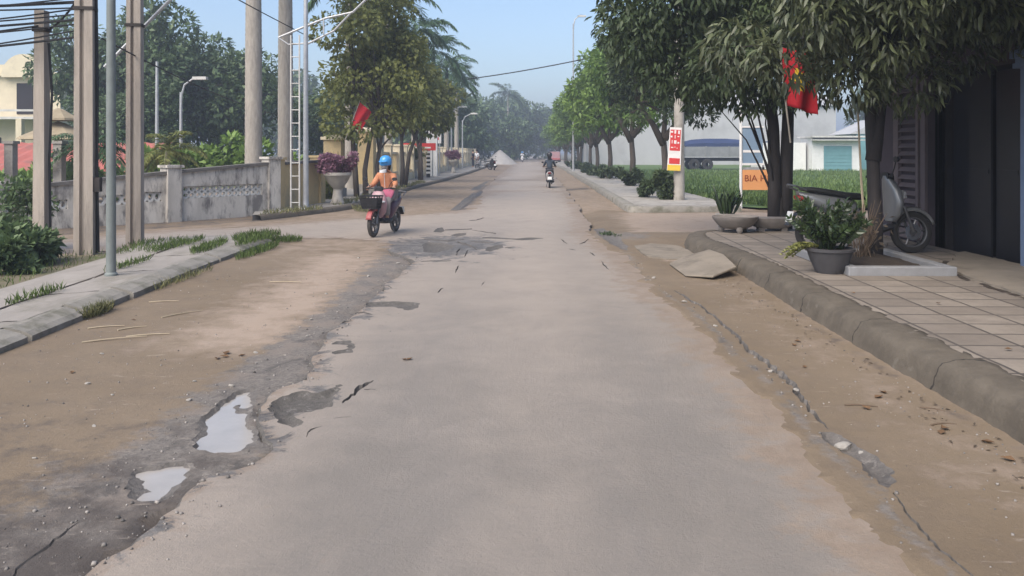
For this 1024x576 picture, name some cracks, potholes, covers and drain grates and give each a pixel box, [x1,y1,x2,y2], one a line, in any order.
crack [894,494,974,576]
crack [421,218,543,292]
crack [13,523,77,576]
crack [306,381,378,437]
pothole [192,386,259,453]
pothole [332,340,355,354]
pothole [422,242,455,253]
crack [674,290,828,429]
pothole [365,301,420,310]
pothole [126,460,195,503]
pothole [267,384,343,427]
